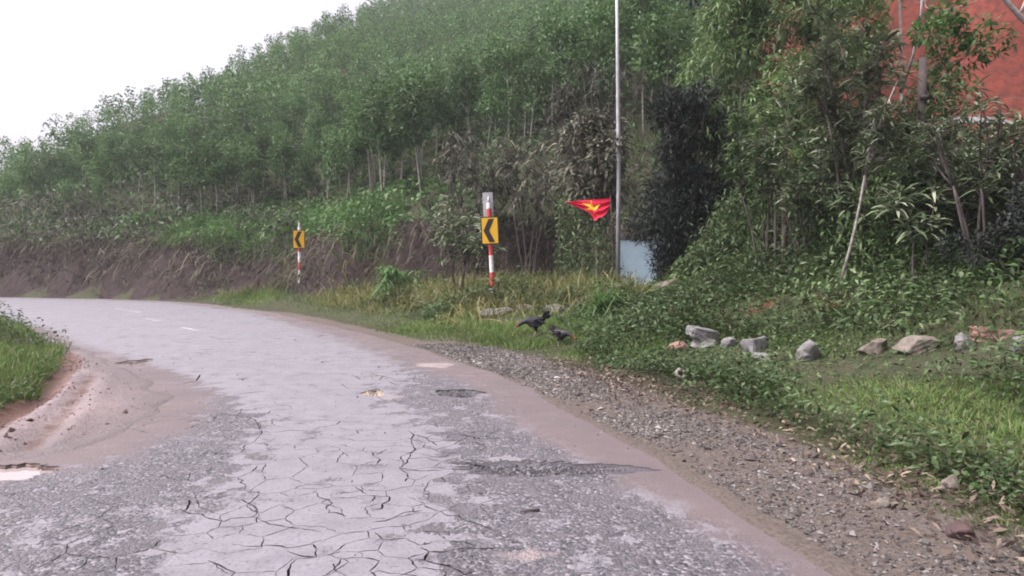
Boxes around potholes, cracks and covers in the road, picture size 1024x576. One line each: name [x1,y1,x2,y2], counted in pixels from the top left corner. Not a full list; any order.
crack [342,374,415,401]
pothole [448,460,661,478]
pothole [436,390,486,398]
crack [36,392,523,576]
